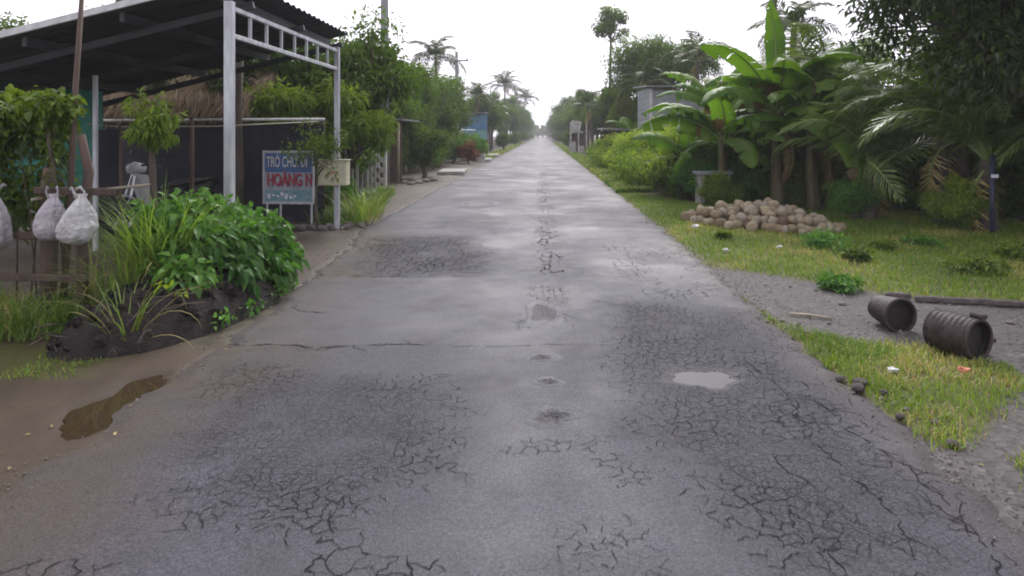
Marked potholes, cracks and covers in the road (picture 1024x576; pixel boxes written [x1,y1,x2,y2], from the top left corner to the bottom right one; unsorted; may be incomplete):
crack [1,359,470,576]
pothole [523,353,562,363]
crack [517,172,576,329]
crack [540,512,671,576]
crack [597,300,1017,576]
pothole [523,299,565,327]
pothole [522,405,582,429]
crack [458,408,651,488]
pothole [528,376,566,389]
